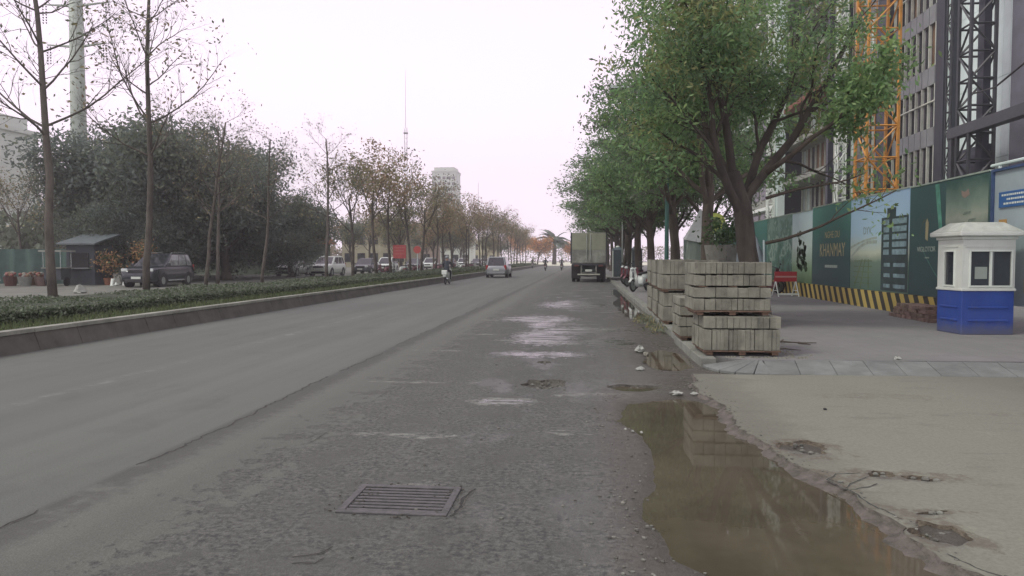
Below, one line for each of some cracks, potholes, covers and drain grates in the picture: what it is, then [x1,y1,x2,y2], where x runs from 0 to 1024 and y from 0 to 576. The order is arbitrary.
pothole [907,520,973,542]
pothole [520,380,566,389]
drain grate [316,481,464,520]
pothole [775,440,827,455]
crack [825,473,902,519]
